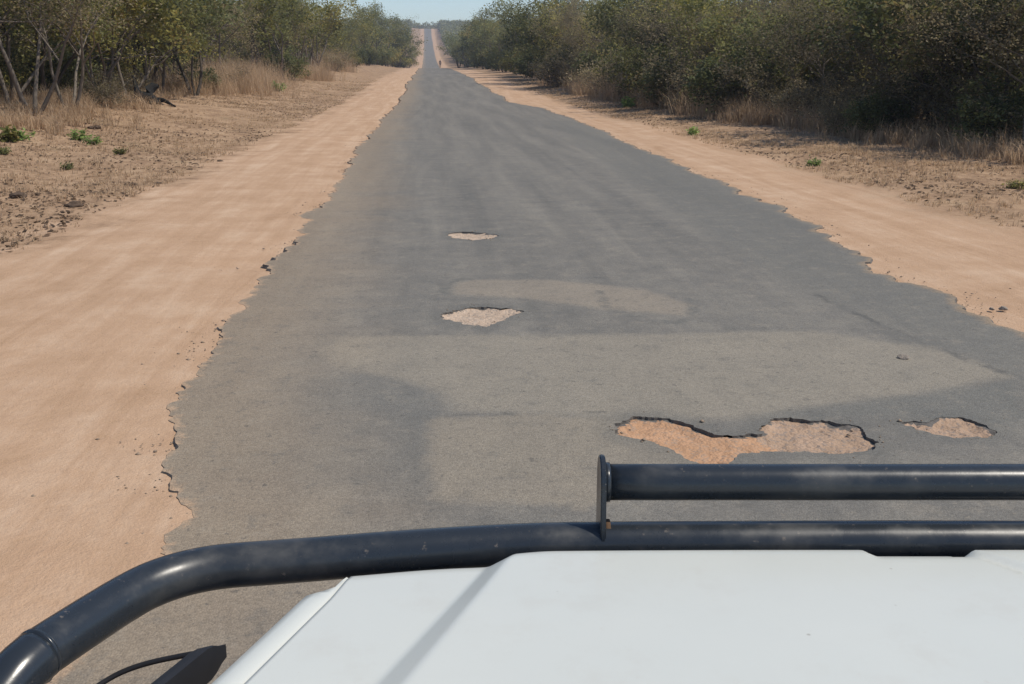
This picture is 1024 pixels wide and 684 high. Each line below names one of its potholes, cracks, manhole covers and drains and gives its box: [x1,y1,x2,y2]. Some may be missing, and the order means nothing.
pothole [614,416,879,464]
pothole [440,307,525,327]
pothole [900,417,997,438]
pothole [447,232,499,240]
